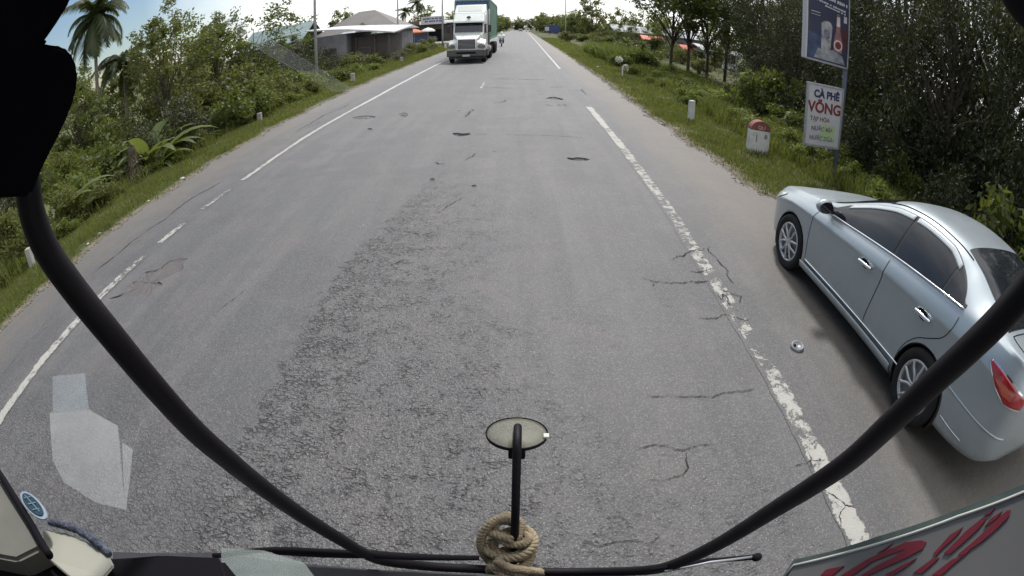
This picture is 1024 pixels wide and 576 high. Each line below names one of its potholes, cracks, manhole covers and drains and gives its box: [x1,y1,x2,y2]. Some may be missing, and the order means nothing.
crack [649,248,744,320]
crack [649,388,756,397]
crack [634,444,710,481]
crack [93,184,217,276]
